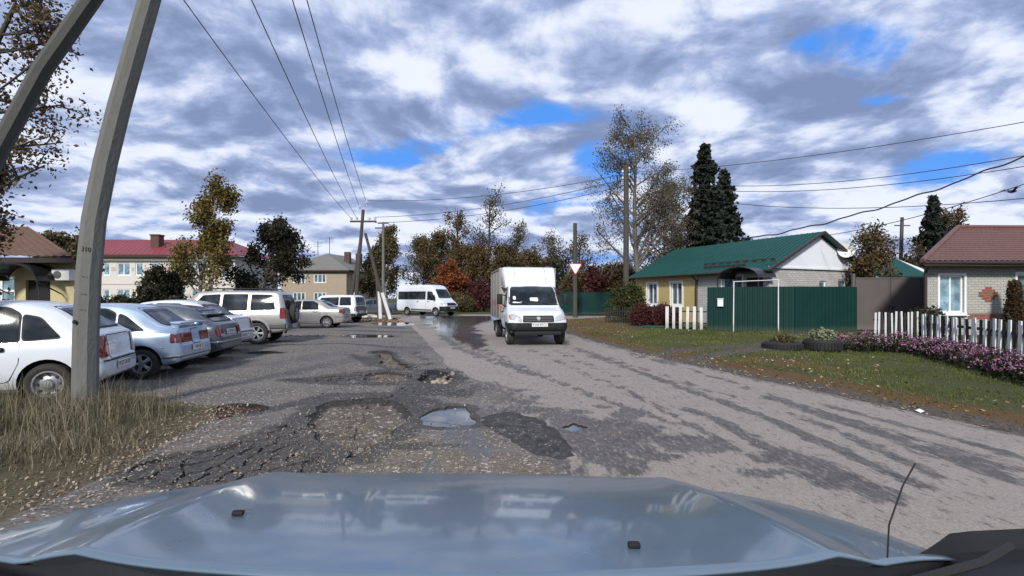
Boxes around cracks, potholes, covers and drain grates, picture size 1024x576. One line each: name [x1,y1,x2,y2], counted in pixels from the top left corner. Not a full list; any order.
pothole [416,370,455,384]
pothole [420,406,477,427]
pothole [372,351,412,369]
pothole [305,397,413,458]
pothole [363,372,413,383]
pothole [562,423,587,432]
pothole [206,403,269,419]
crack [124,424,327,487]
